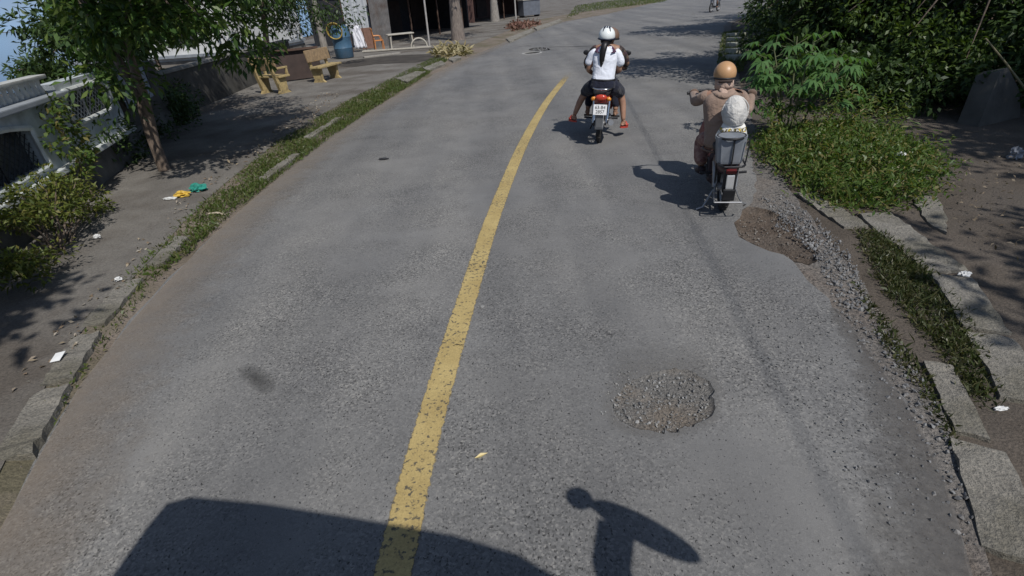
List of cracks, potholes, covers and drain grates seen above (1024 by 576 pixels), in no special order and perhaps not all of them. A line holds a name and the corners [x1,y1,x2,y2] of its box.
pothole [594,368,715,434]
pothole [734,207,818,265]
